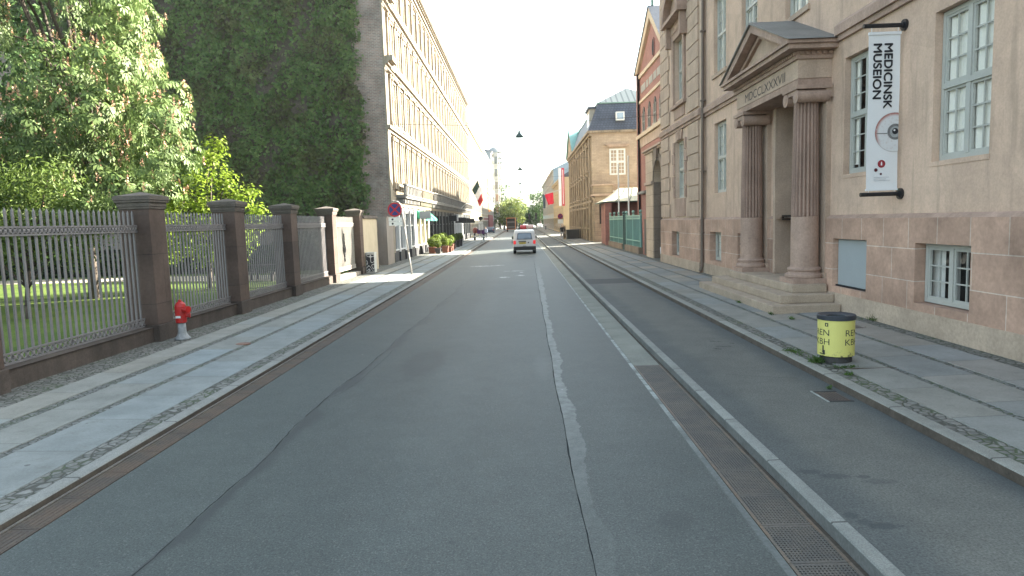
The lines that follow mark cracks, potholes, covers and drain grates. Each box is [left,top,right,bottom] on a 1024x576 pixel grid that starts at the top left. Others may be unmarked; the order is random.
crack [132,270,481,576]
drain grate [735,494,814,526]
drain grate [640,373,676,383]
drain grate [674,416,724,432]
drain grate [789,562,864,576]
drain grate [686,431,740,450]
drain grate [664,403,709,417]
drain grate [647,382,686,393]
manhole cover [810,391,853,402]
crack [535,269,597,576]
drain grate [655,392,697,404]
drain grate [759,524,851,565]
